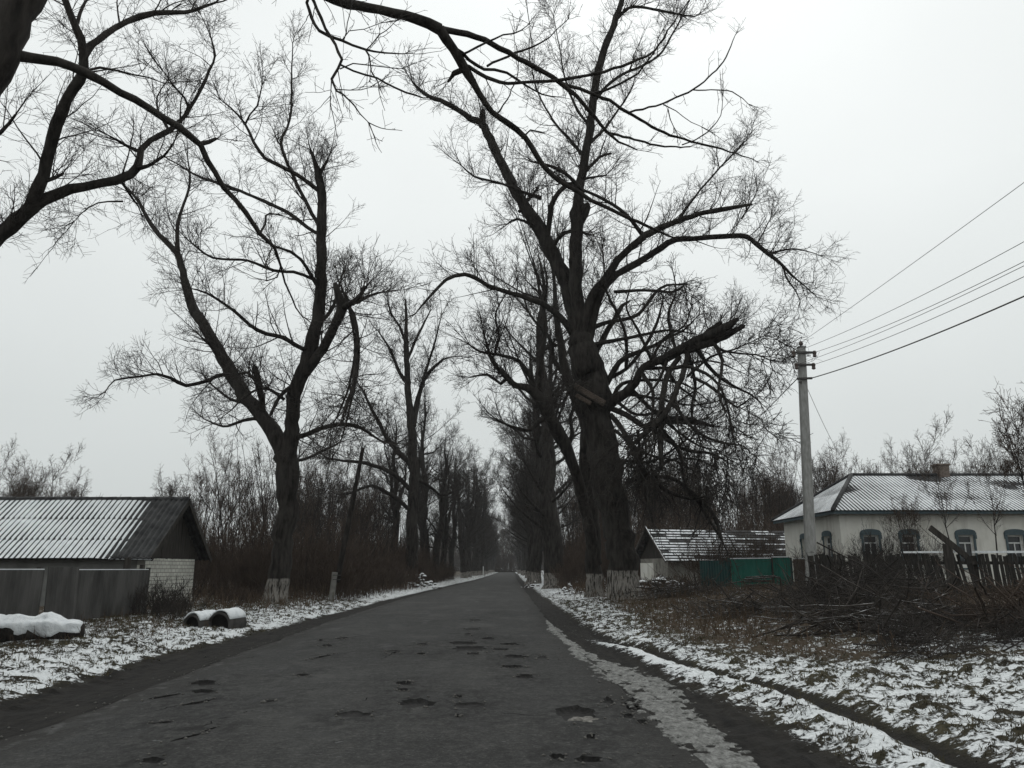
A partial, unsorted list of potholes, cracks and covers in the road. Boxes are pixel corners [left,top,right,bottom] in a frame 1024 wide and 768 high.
pothole [397,698,436,708]
pothole [555,705,599,722]
pothole [141,756,165,764]
